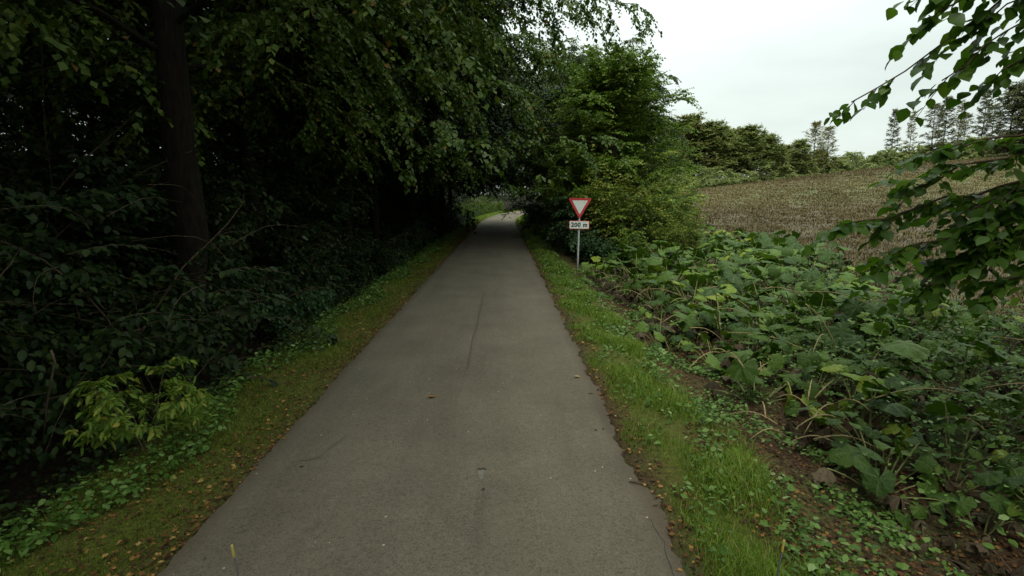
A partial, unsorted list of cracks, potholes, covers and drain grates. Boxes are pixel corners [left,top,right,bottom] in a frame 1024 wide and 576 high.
crack [650,514,675,576]
crack [463,293,484,377]
